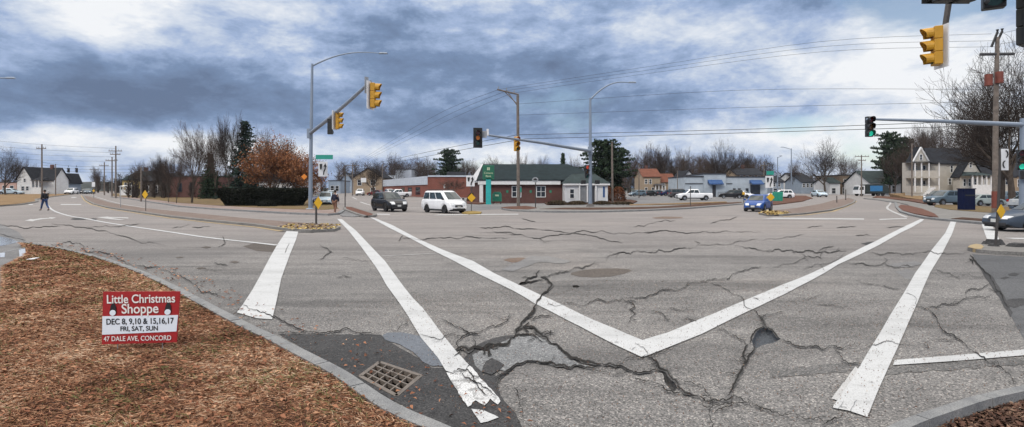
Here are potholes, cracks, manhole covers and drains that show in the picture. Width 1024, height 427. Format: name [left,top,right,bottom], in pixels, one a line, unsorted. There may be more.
crack [3,217,1014,427]
pothole [752,327,780,349]
drain grate [358,361,423,396]
